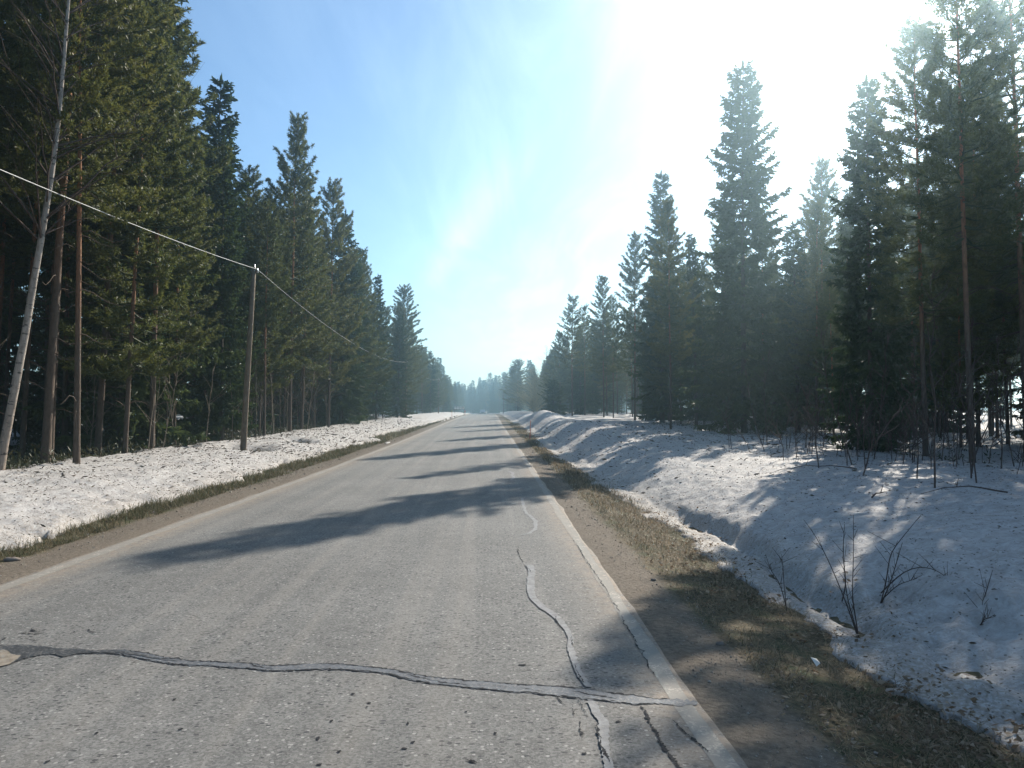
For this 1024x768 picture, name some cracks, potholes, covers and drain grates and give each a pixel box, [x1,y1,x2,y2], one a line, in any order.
crack [556,695,587,737]
crack [640,706,709,768]
crack [573,540,655,674]
